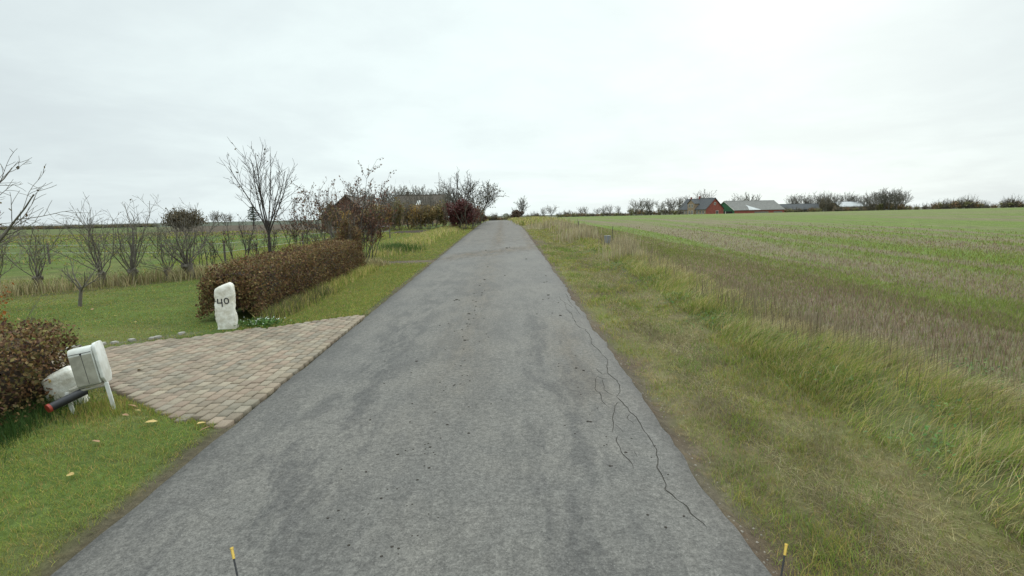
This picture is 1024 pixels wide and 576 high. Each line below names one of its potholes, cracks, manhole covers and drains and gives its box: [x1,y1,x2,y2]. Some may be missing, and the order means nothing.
crack [560,294,707,529]
